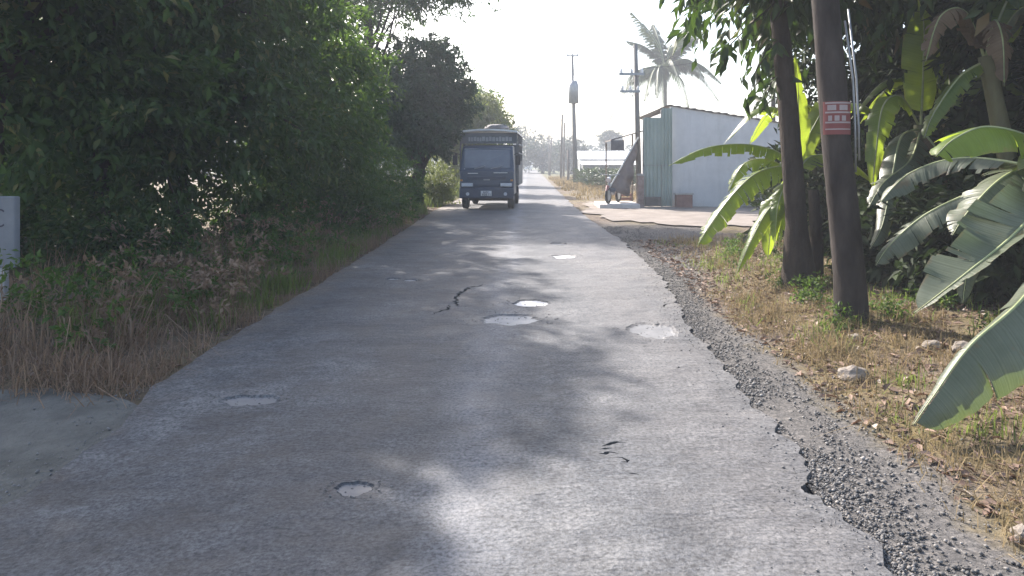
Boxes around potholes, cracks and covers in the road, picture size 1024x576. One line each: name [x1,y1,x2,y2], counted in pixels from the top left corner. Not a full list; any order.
pothole [480,314,543,326]
crack [432,284,484,315]
pothole [511,299,551,307]
pothole [218,395,281,406]
crack [598,441,639,475]
pothole [334,480,375,497]
pothole [625,322,679,339]
